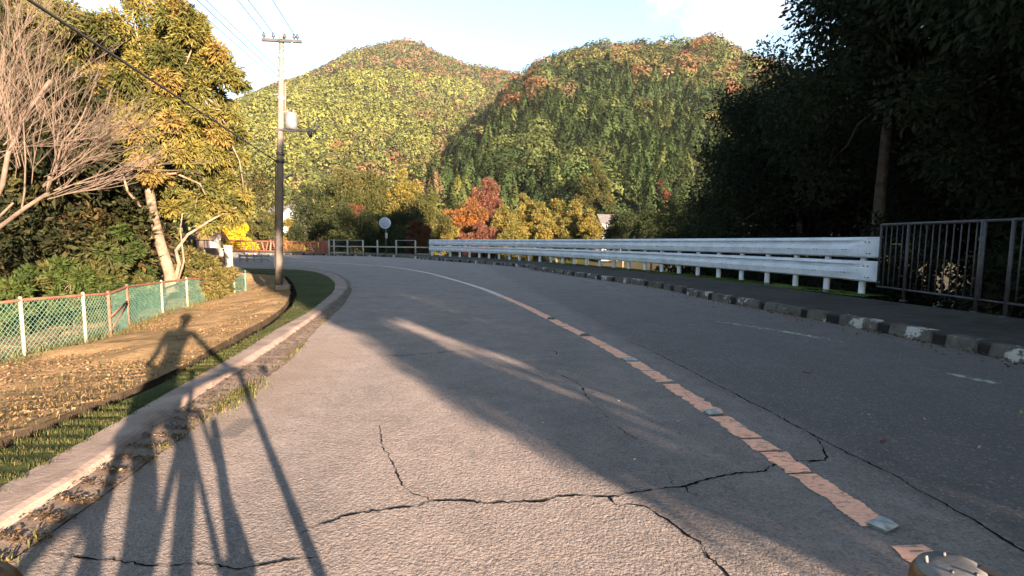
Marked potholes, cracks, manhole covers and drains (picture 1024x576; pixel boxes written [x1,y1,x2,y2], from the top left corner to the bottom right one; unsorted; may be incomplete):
crack [46,535,313,569]
crack [301,342,1024,576]
